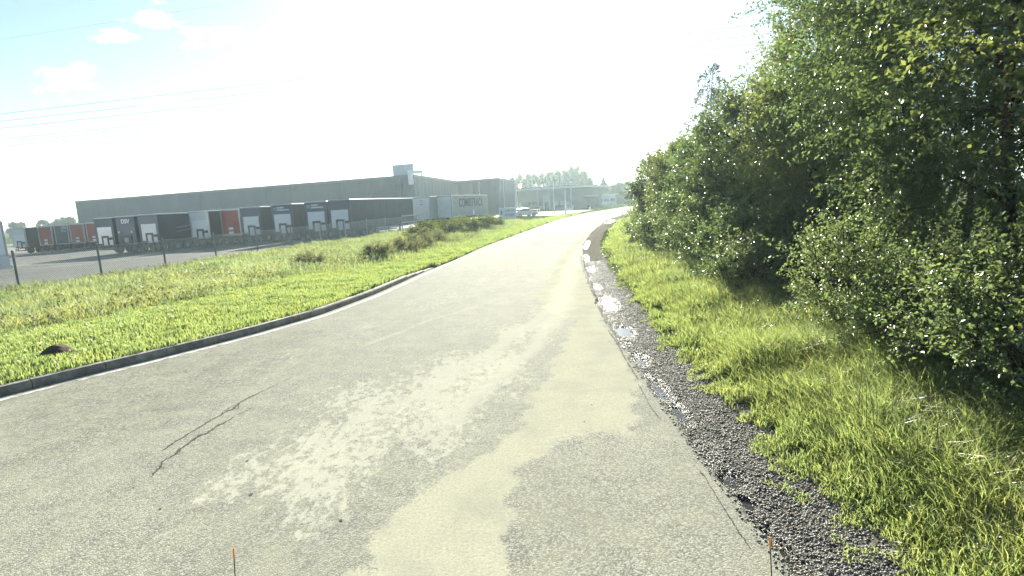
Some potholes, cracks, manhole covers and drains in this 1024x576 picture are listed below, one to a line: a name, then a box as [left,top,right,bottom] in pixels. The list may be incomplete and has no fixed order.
crack [124,377,292,491]
